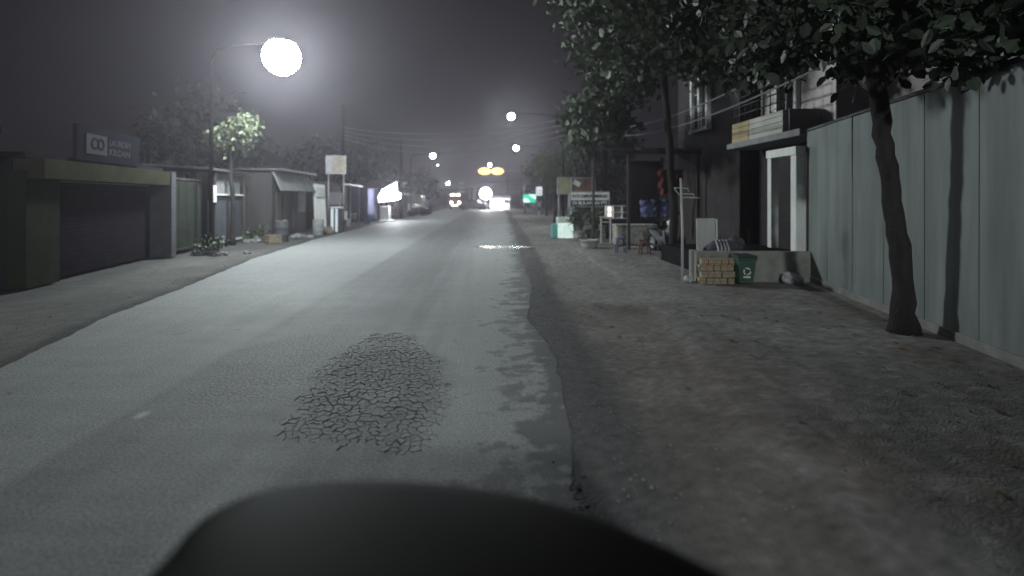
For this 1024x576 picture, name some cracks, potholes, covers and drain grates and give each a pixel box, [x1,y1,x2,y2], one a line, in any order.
crack [266,331,462,466]
